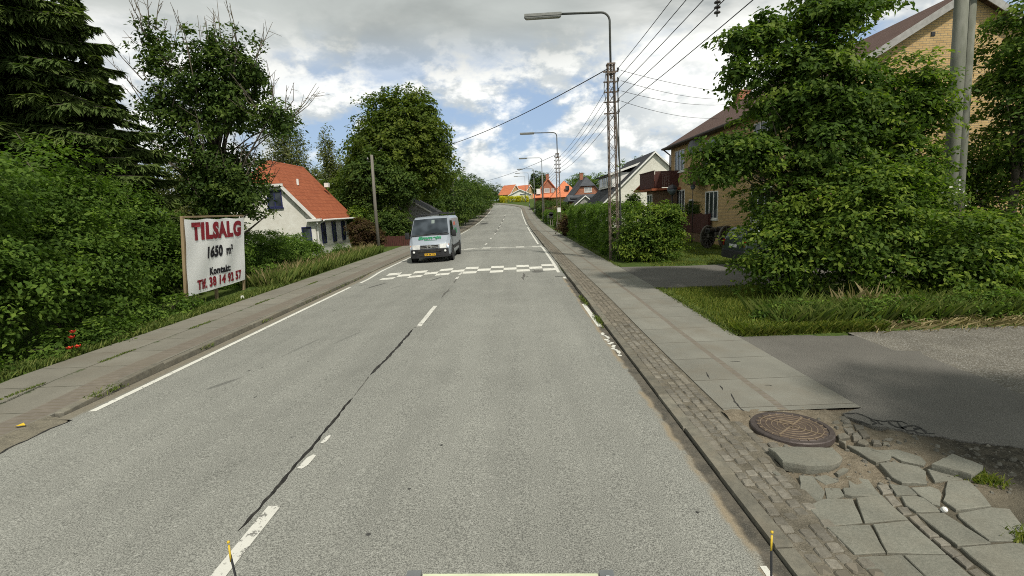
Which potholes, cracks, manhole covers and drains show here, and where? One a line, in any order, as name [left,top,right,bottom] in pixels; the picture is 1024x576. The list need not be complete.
crack [370,318,428,375]
crack [845,413,936,434]
crack [238,398,353,531]
manhole cover [750,412,836,448]
